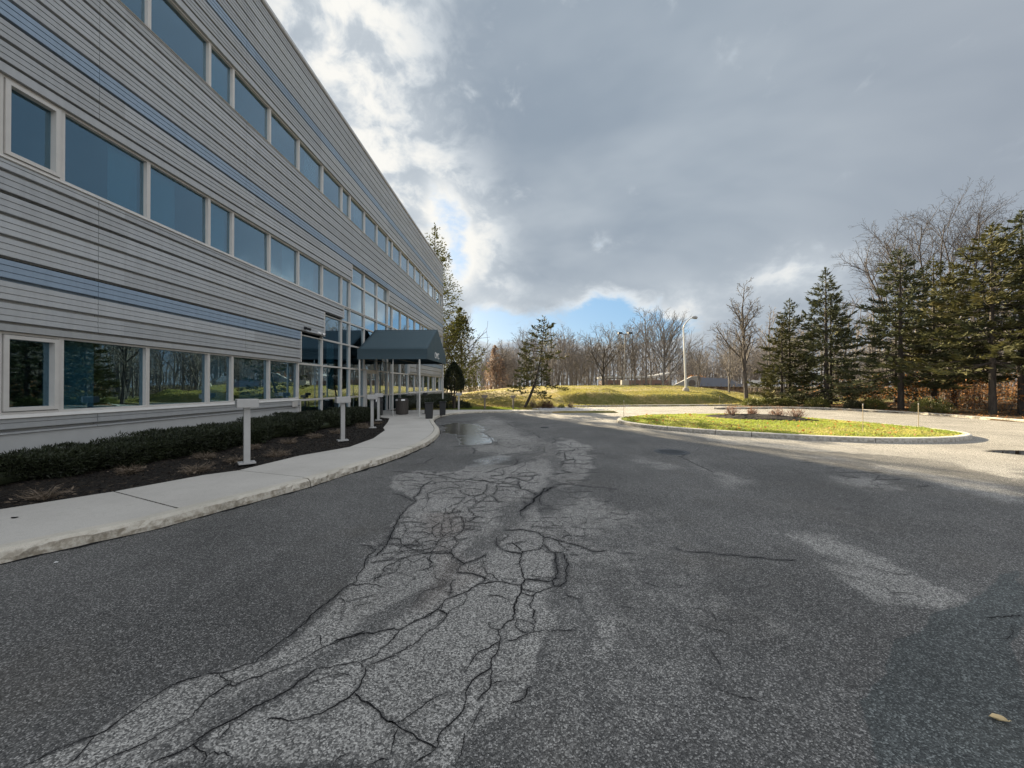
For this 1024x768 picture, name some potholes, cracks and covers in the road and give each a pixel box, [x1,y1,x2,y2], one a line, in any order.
crack [692,603,785,702]
crack [22,438,633,767]
